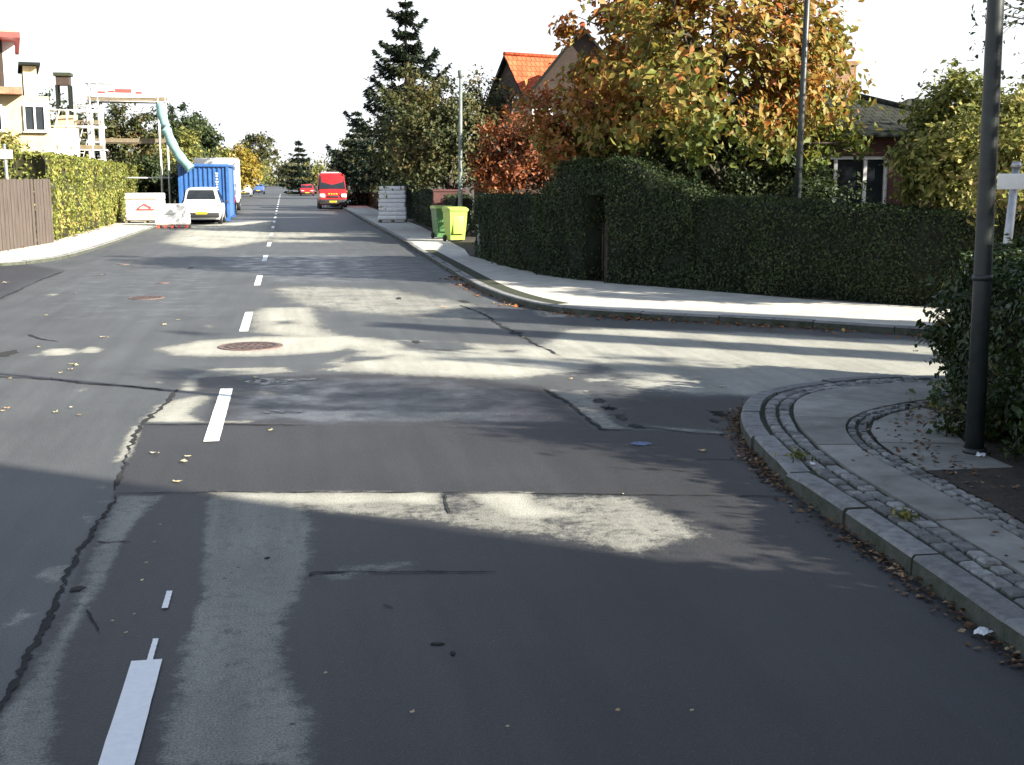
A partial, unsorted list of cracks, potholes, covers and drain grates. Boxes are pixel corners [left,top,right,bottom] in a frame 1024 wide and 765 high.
manhole cover [218,341,283,351]
crack [461,305,556,354]
